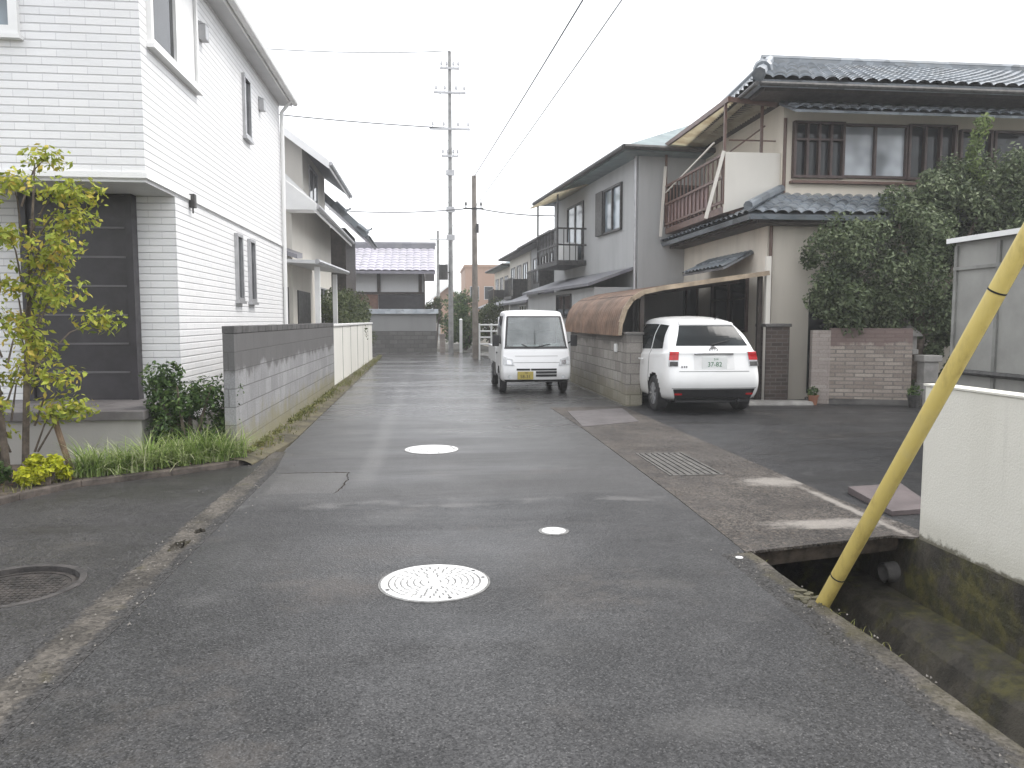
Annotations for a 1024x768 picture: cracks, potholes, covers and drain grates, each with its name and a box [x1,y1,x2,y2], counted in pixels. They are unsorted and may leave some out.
manhole cover [404,445,459,454]
manhole cover [0,564,88,609]
manhole cover [378,564,490,603]
utility cover [538,527,569,535]
drain grate [635,452,724,476]
crack [279,472,349,493]
